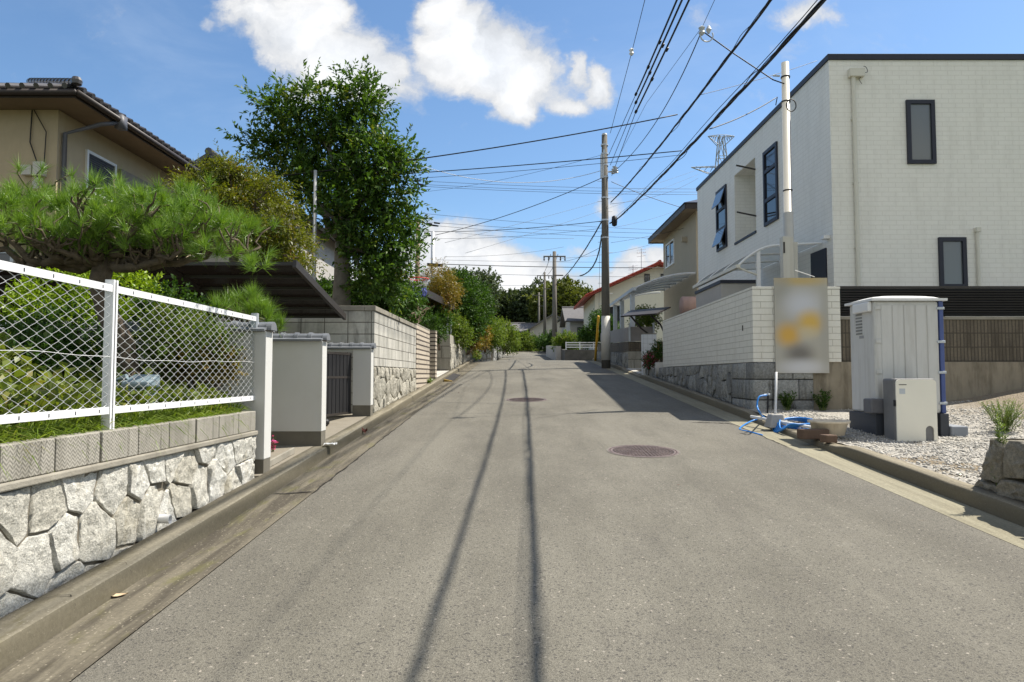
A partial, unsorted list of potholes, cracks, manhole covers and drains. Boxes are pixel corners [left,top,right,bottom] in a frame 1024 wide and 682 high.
manhole cover [606,445,681,458]
